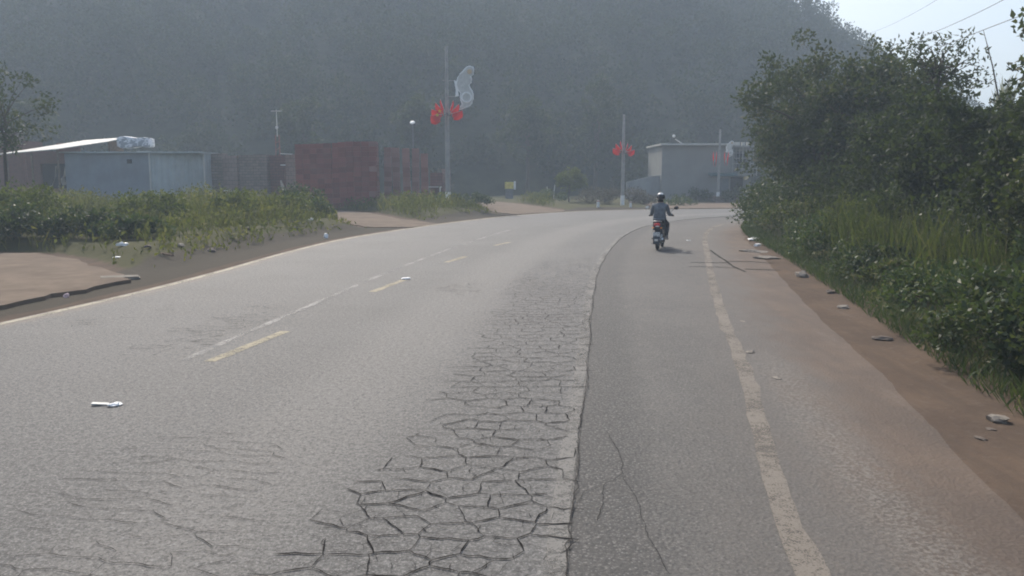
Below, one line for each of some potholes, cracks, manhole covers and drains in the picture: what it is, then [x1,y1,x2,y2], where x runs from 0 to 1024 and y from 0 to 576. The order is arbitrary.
crack [579,436,669,573]
crack [3,429,296,576]
crack [688,250,766,272]
